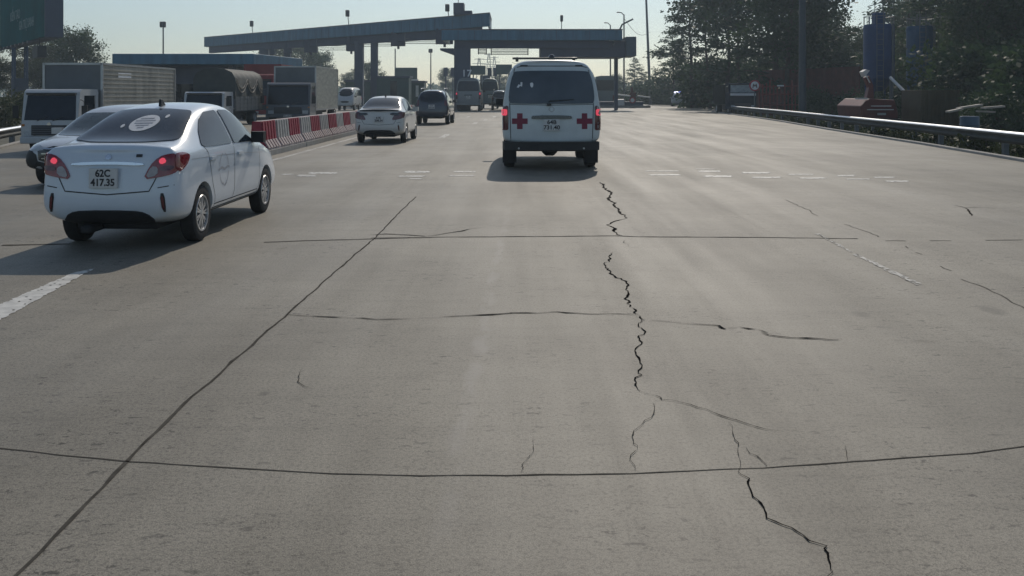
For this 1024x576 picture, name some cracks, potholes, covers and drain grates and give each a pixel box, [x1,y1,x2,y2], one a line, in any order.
crack [289,183,922,576]
